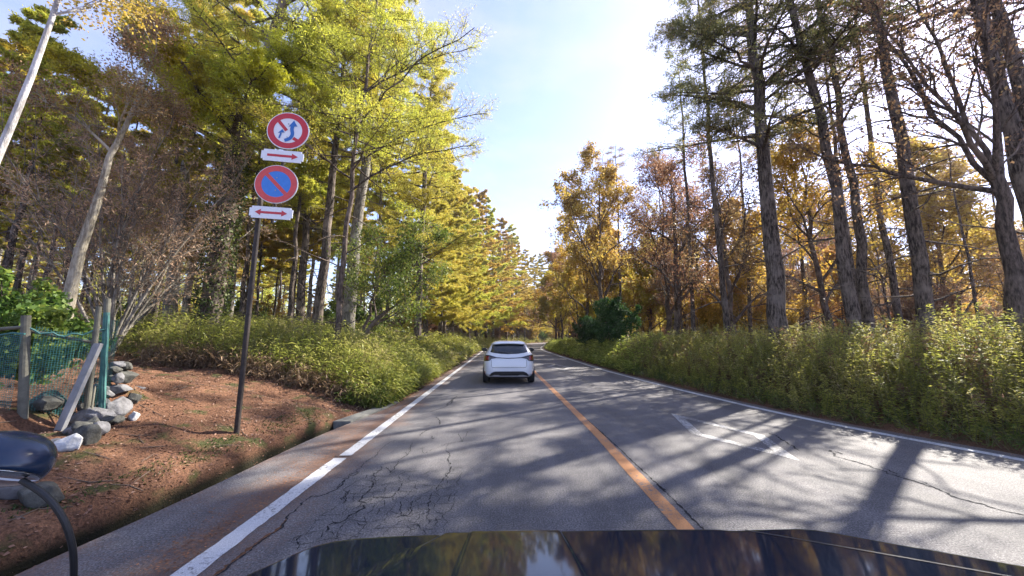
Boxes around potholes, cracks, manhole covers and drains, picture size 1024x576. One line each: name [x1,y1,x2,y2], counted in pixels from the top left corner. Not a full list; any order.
crack [829,450,1023,515]
crack [213,430,471,576]
